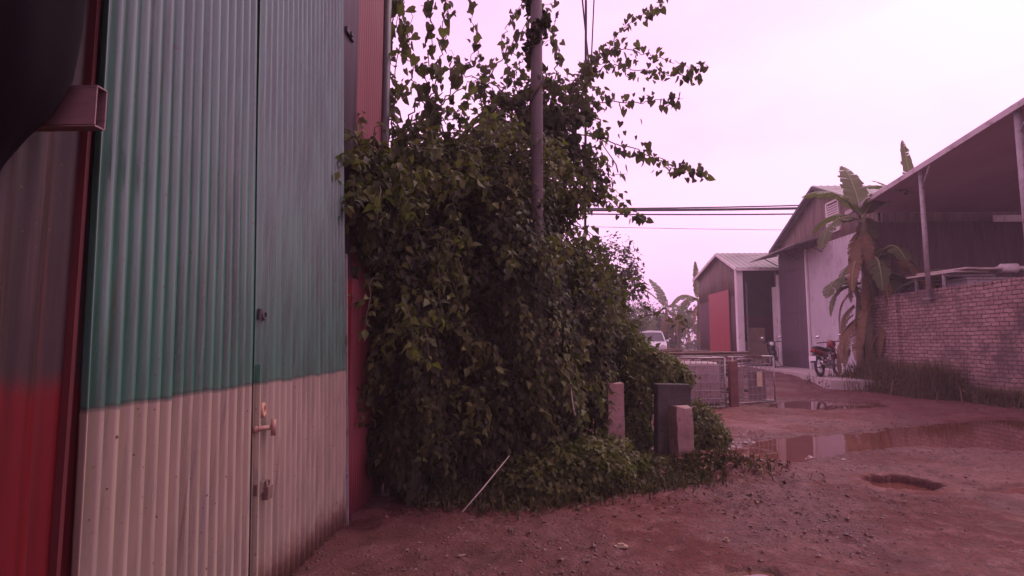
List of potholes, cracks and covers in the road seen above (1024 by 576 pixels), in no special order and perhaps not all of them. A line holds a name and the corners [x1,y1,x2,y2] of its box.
pothole [847,472,962,497]
